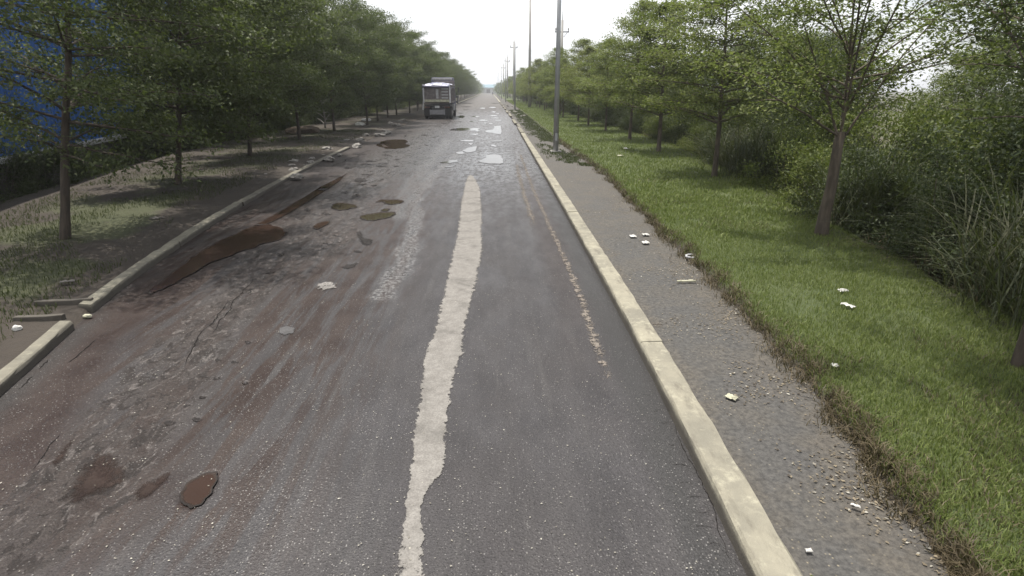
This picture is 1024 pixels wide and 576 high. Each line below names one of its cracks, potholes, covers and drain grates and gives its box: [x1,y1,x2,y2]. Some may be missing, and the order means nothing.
pothole [360,212,396,221]
pothole [331,202,358,211]
pothole [254,174,346,225]
pothole [179,471,218,508]
pothole [376,139,410,149]
crack [186,280,253,362]
